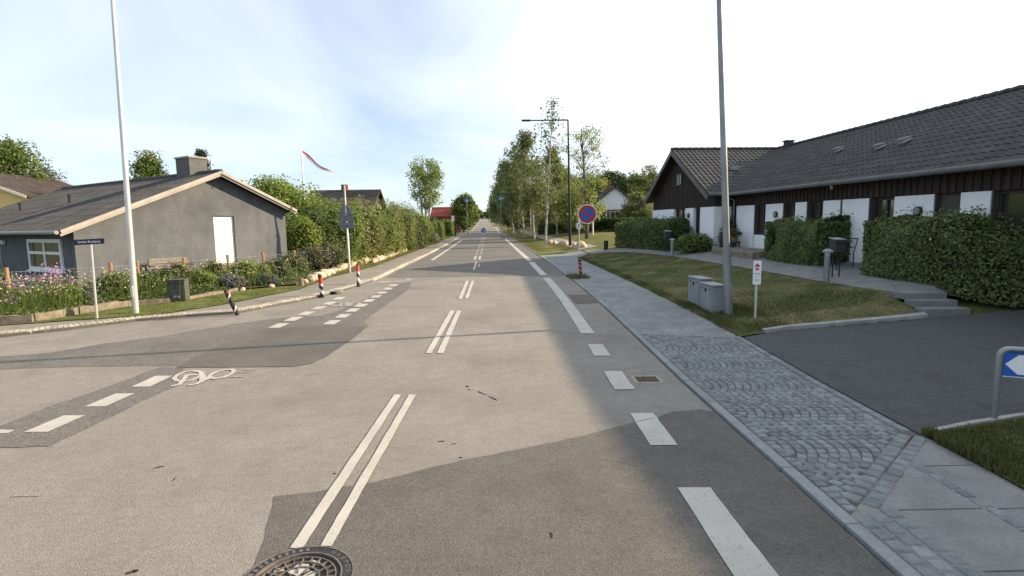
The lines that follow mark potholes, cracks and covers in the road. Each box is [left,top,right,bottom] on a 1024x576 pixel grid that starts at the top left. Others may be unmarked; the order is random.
manhole cover [244,546,354,576]
drain grate [631,375,665,383]
